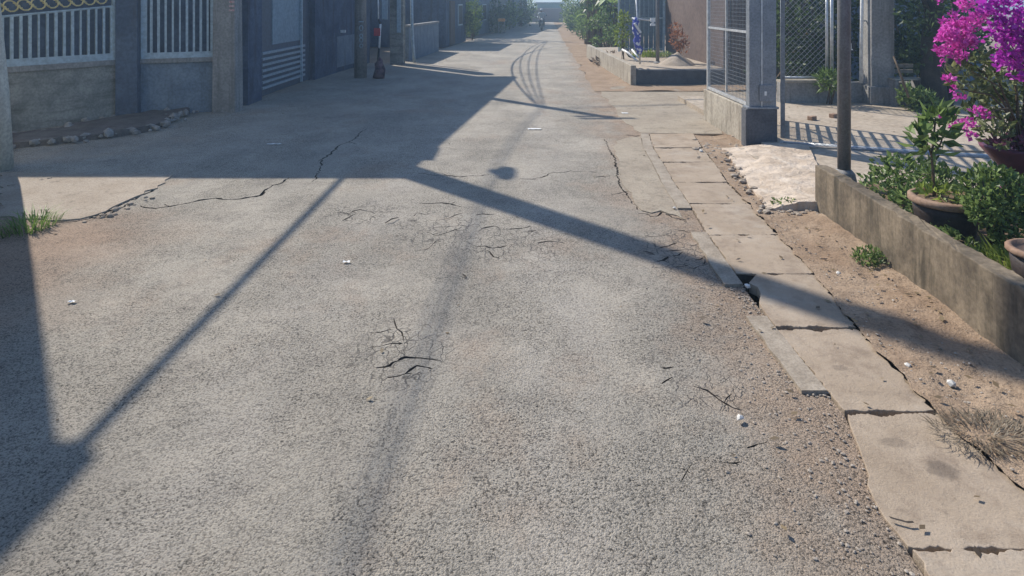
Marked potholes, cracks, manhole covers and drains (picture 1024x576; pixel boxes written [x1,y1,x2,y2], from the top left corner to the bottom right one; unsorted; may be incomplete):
crack [370,320,441,378]
crack [56,179,287,223]
crack [423,135,706,269]
crack [694,386,741,411]
crack [312,130,364,182]
pothole [736,274,755,302]
